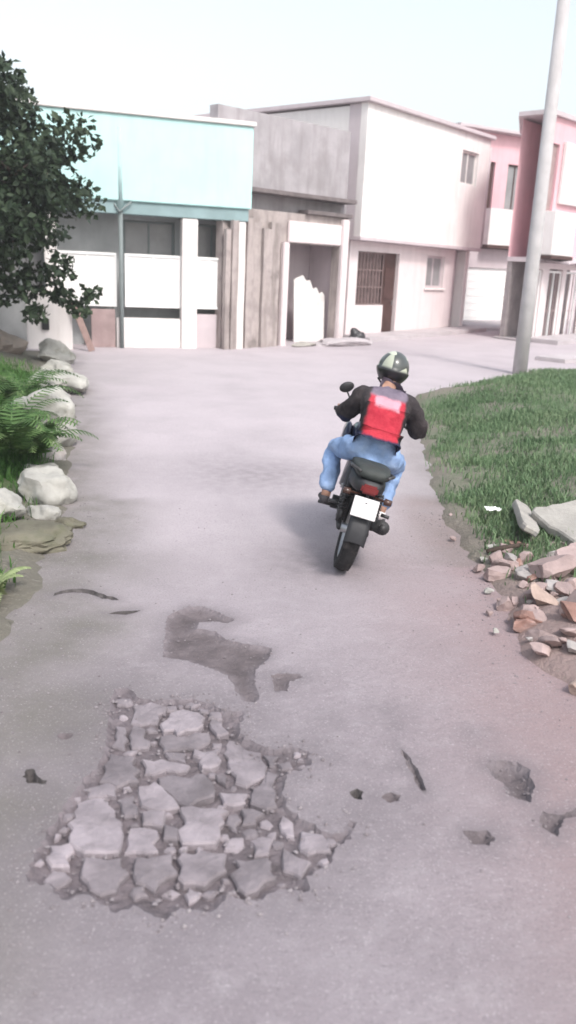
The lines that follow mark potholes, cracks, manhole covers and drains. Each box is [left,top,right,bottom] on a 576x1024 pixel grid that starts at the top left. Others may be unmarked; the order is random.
pothole [458,830,497,847]
pothole [382,792,401,803]
crack [53,589,140,615]
pothole [163,604,273,704]
pothole [487,760,540,805]
pothole [23,769,47,784]
pothole [269,672,302,692]
pothole [532,808,576,839]
pothole [350,789,363,800]
crack [401,749,426,795]
